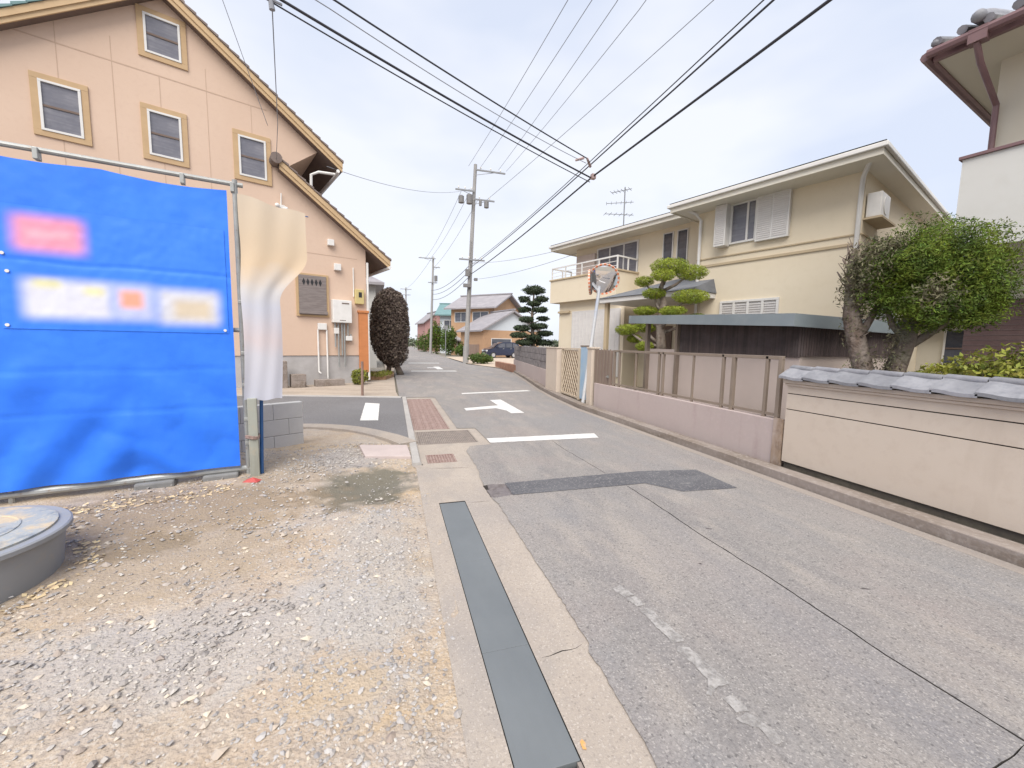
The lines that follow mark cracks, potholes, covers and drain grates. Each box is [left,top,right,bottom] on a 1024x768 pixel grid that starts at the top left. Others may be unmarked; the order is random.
drain grate [415,430,478,445]
drain grate [425,454,457,464]
